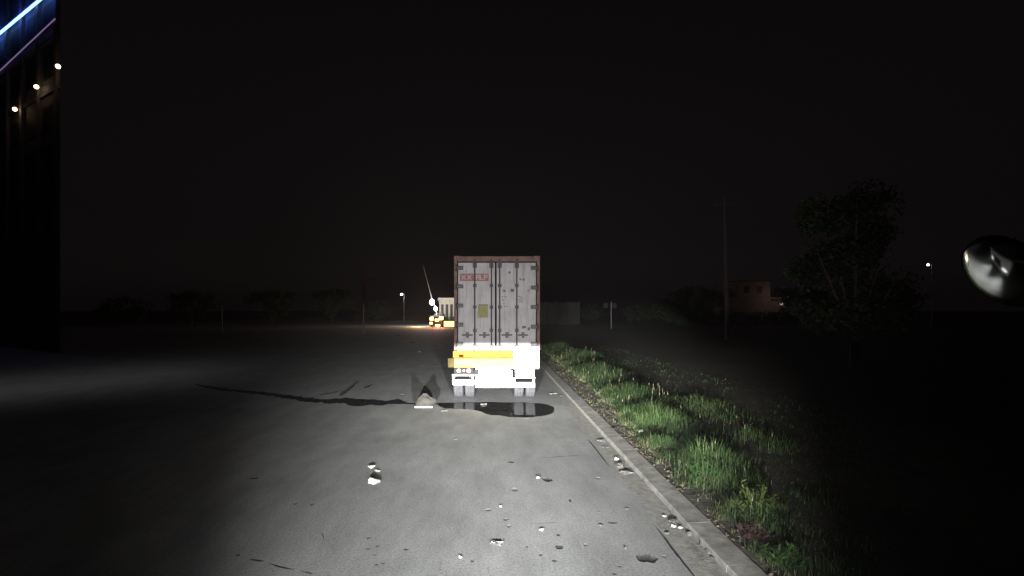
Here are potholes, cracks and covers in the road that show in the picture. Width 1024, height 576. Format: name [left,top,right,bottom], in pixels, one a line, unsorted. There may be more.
pothole [636,554,659,563]
